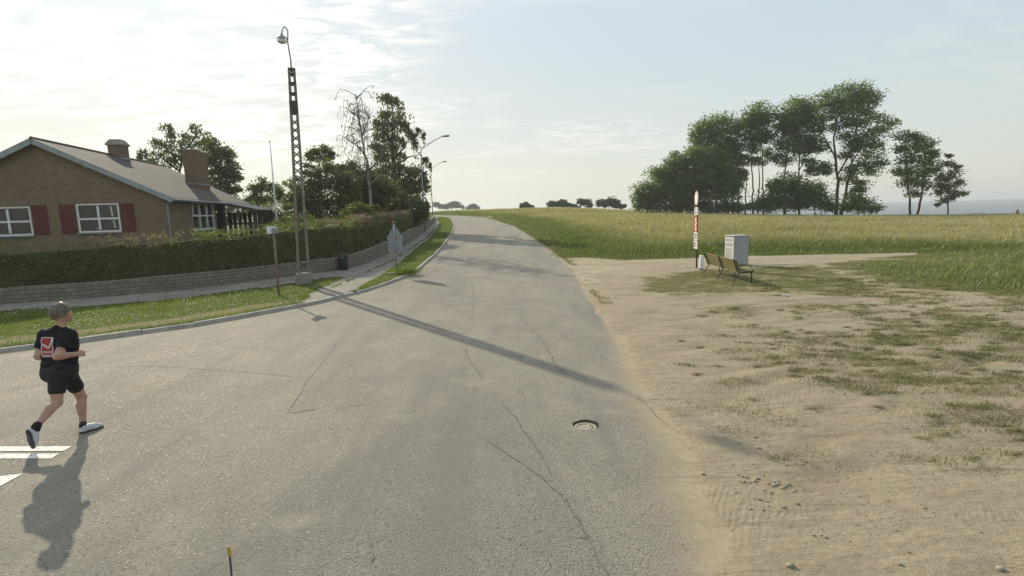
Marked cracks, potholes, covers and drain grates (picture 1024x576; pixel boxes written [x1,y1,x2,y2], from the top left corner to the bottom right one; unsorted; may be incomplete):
manhole cover [572,419,600,430]
crack [487,401,609,574]
